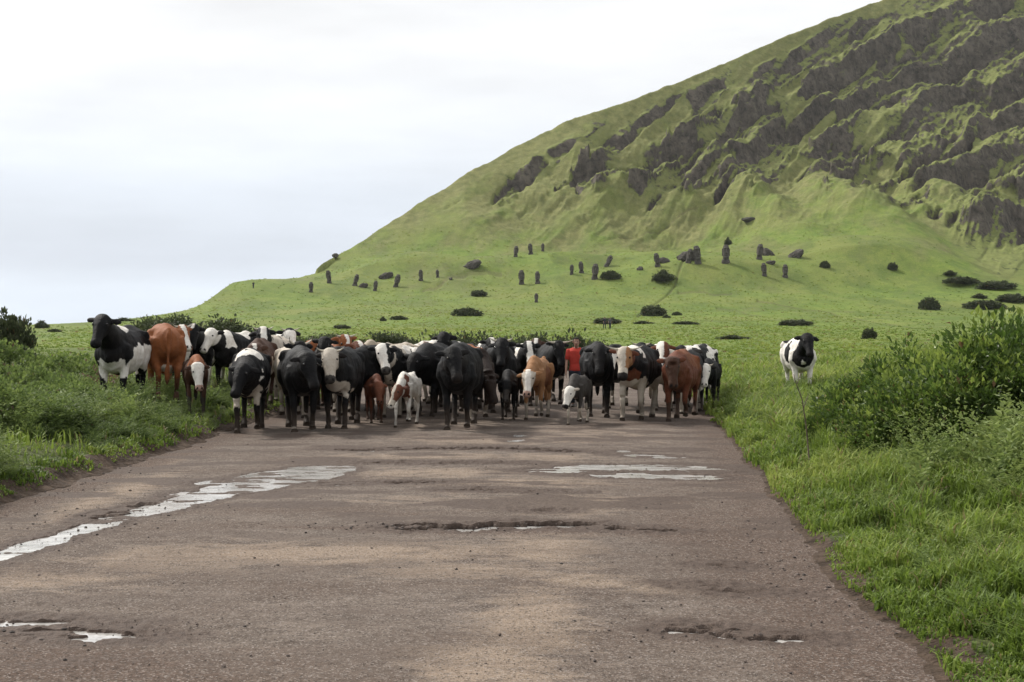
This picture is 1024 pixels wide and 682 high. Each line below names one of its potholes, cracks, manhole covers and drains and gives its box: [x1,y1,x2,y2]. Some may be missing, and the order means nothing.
pothole [384,519,679,532]
pothole [129,465,357,516]
pothole [0,617,140,643]
pothole [663,623,816,643]
pothole [517,463,732,480]
pothole [615,450,687,459]
pothole [0,513,142,561]
pothole [85,502,161,520]
